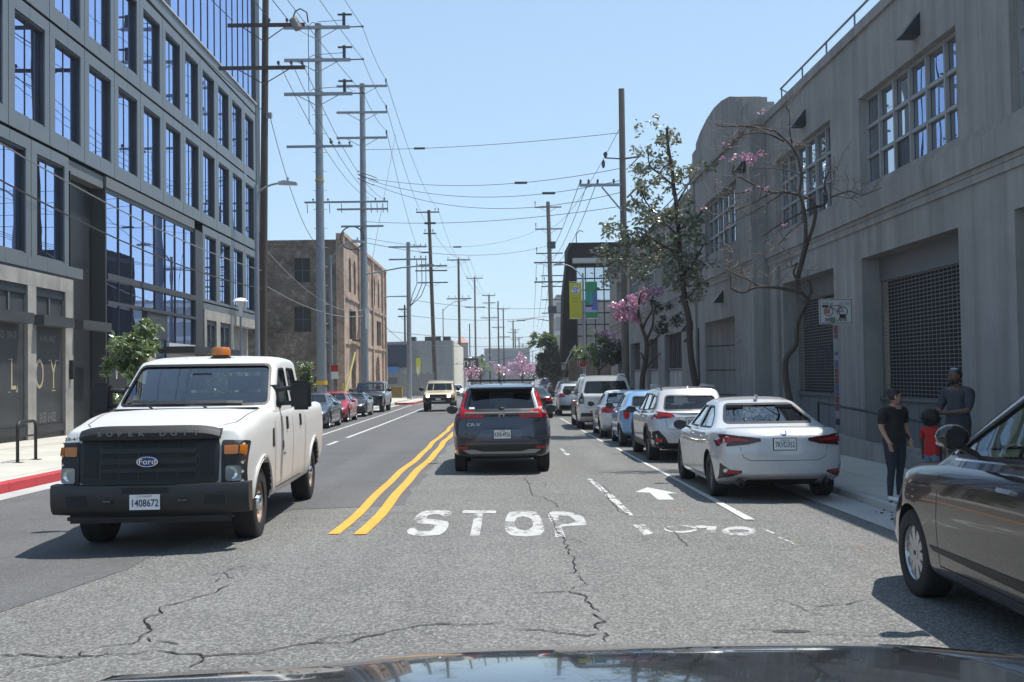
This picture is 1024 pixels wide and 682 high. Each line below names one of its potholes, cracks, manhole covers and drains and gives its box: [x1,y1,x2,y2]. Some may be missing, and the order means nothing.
crack [3,564,492,676]
crack [518,480,609,641]
